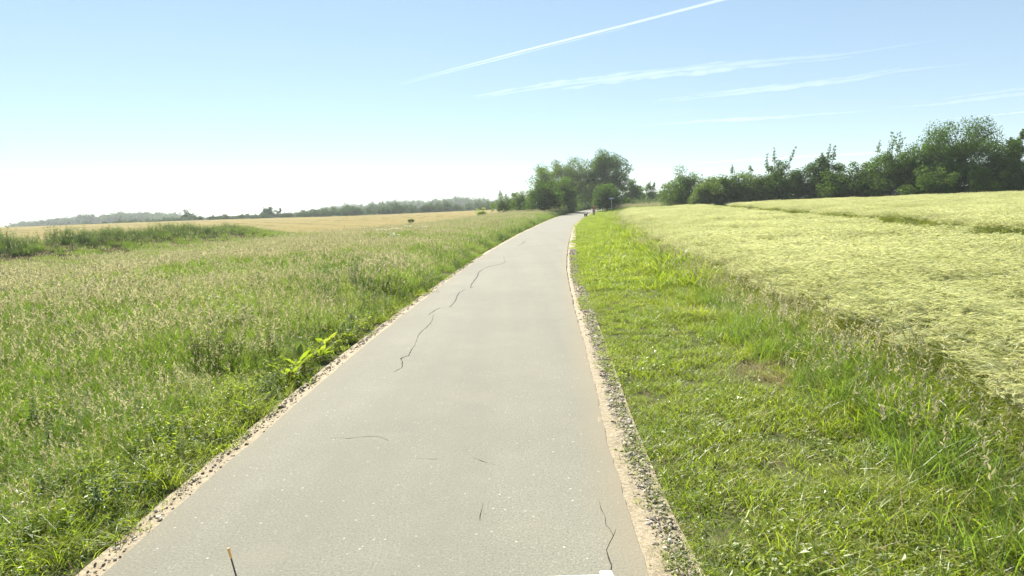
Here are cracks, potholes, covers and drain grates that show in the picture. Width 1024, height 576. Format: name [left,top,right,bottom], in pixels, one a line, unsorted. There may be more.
crack [599,502,616,571]
crack [394,242,524,372]
